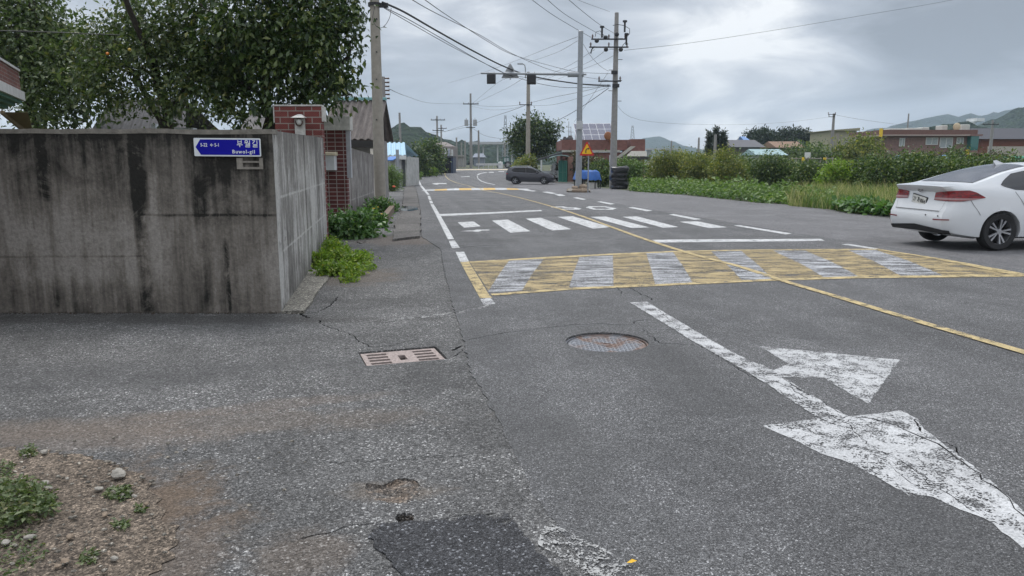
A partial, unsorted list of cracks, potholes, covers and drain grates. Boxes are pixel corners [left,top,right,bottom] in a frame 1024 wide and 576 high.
pothole [366,479,420,504]
manhole cover [566,334,648,352]
drain grate [360,348,444,366]
